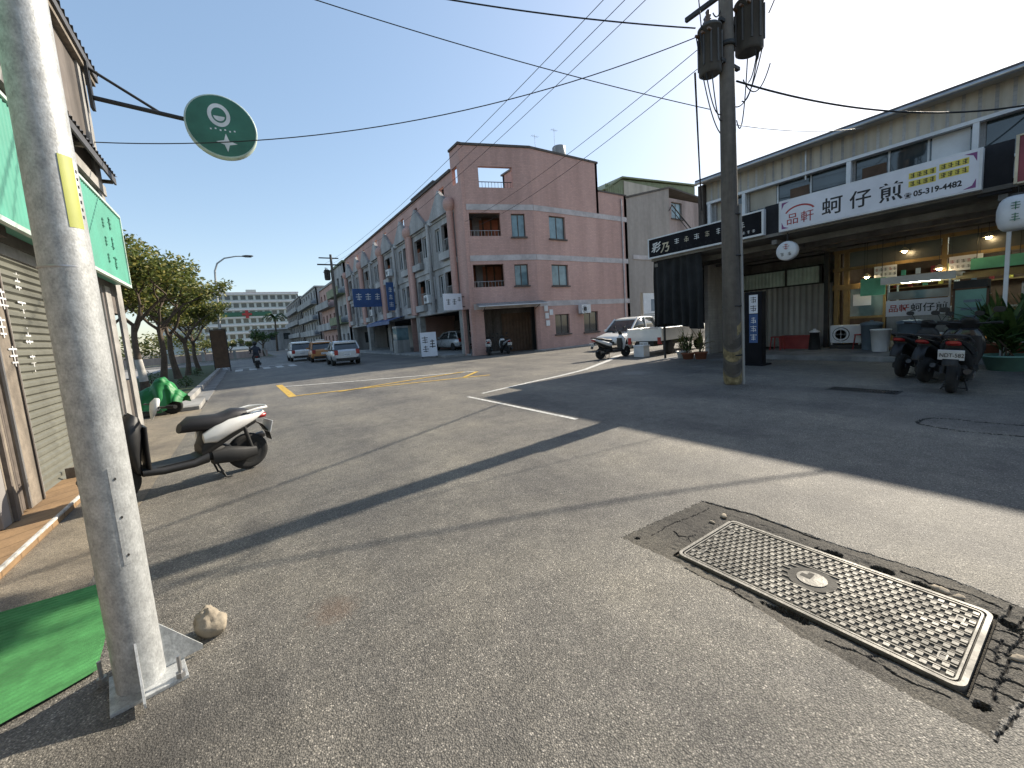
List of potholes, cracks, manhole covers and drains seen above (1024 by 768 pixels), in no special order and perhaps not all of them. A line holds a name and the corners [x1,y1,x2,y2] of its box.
crack [651,502,820,542]
crack [899,571,1024,743]
manhole cover [679,521,993,692]
